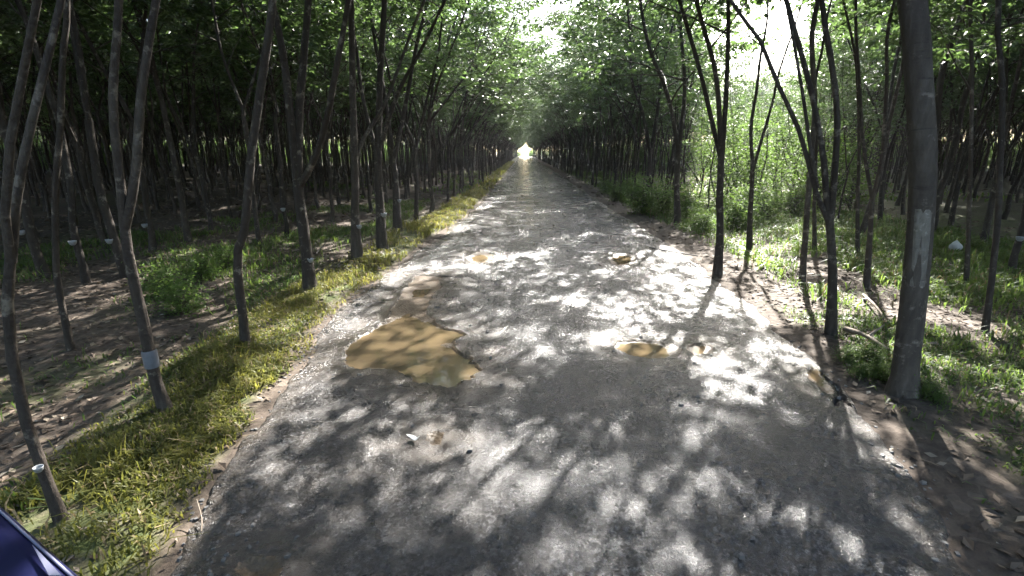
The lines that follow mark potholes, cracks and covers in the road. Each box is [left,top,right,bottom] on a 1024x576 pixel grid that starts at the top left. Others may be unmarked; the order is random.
pothole [614,338,682,359]
pothole [466,252,495,263]
pothole [344,276,482,387]
pothole [607,253,637,266]
pothole [686,343,714,355]
